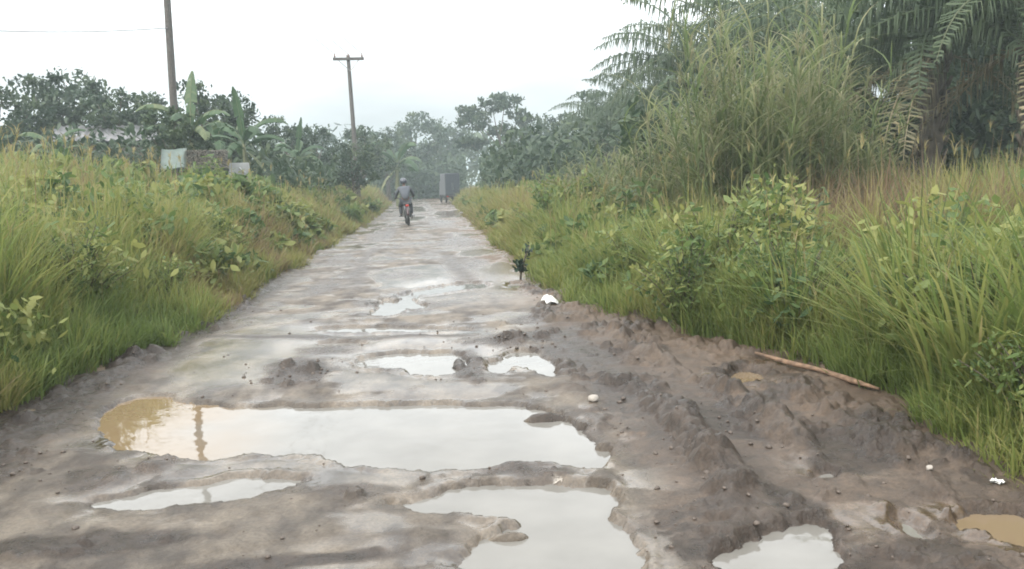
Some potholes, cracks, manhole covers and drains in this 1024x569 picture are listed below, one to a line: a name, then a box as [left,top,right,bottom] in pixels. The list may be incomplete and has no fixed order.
pothole [87,391,624,473]
pothole [372,470,658,569]
pothole [79,468,322,511]
pothole [348,348,475,376]
pothole [363,290,431,316]
pothole [937,497,1024,547]
pothole [479,345,572,377]
pothole [702,507,865,569]
